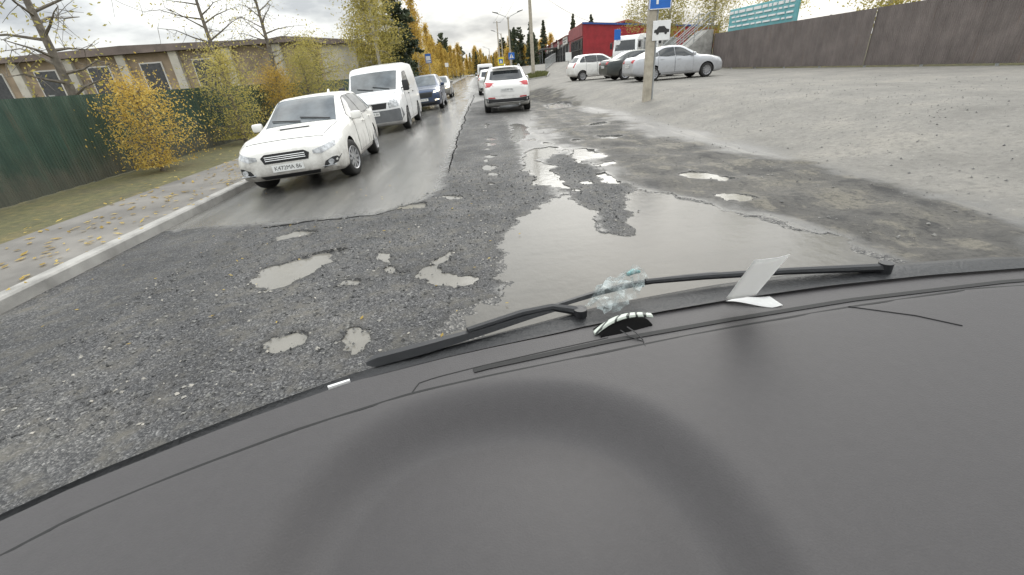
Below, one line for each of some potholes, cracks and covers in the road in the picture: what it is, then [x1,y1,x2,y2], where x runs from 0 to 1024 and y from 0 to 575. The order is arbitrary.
crack [448,95,475,173]
pothole [341,326,372,355]
pothole [519,146,571,189]
pothole [570,148,608,163]
pothole [679,170,737,181]
pothole [595,172,621,184]
pothole [263,330,309,353]
pothole [376,252,409,274]
pothole [249,247,348,293]
pothole [275,229,318,241]
